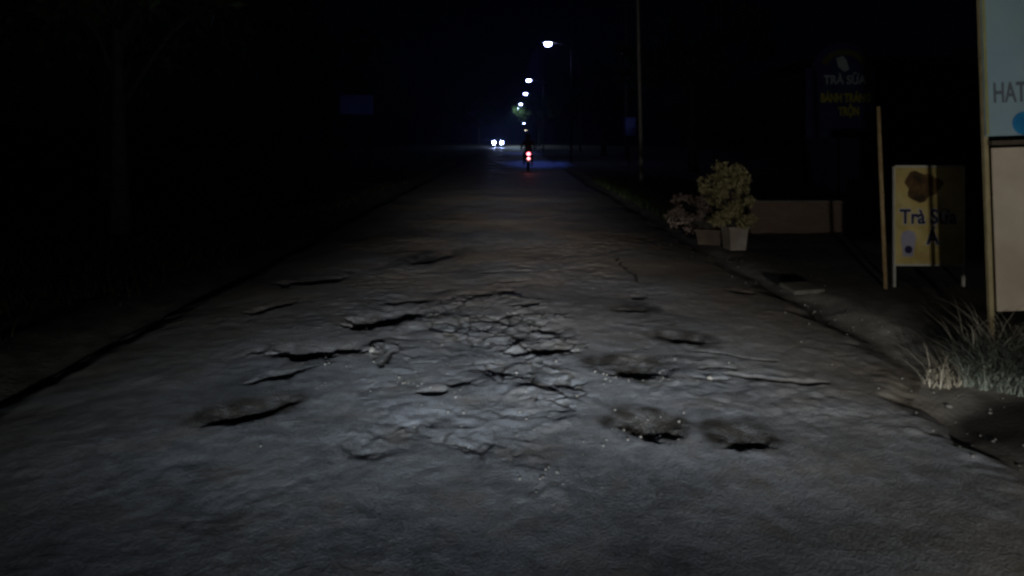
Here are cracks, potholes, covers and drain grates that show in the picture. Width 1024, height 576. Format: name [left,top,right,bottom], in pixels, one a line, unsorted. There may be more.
pothole [647,328,713,347]
pothole [581,350,690,383]
pothole [191,385,309,432]
pothole [236,335,378,362]
pothole [402,248,465,266]
crack [372,271,588,460]
pothole [690,415,780,454]
pothole [333,303,438,331]
crack [614,257,639,282]
crack [690,350,830,386]
pothole [605,407,697,445]
pothole [606,304,654,313]
